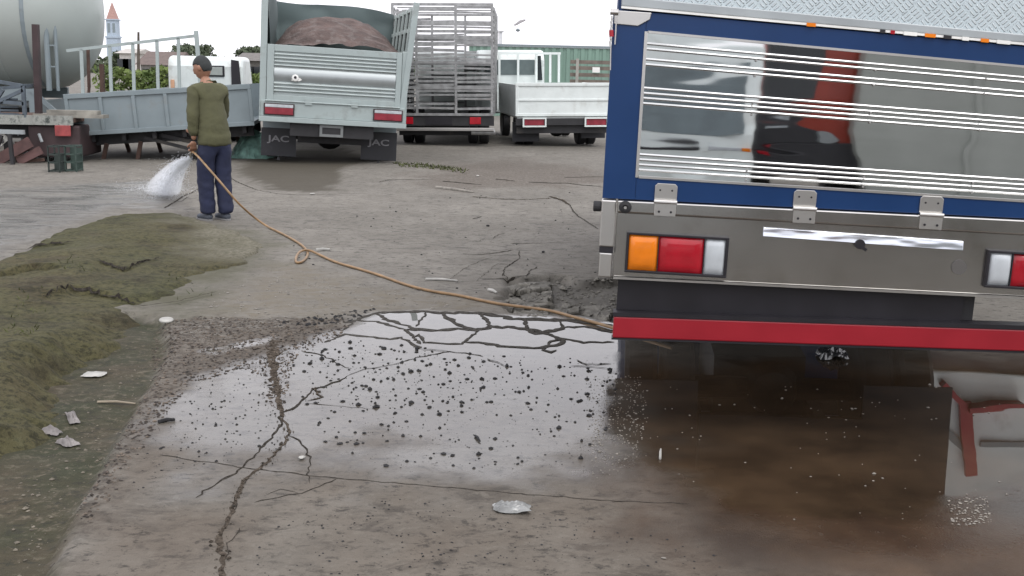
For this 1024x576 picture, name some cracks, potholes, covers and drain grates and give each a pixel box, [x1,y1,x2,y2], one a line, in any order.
crack [446,181,598,229]
pothole [504,276,618,322]
crack [197,310,613,576]
crack [450,233,537,283]
